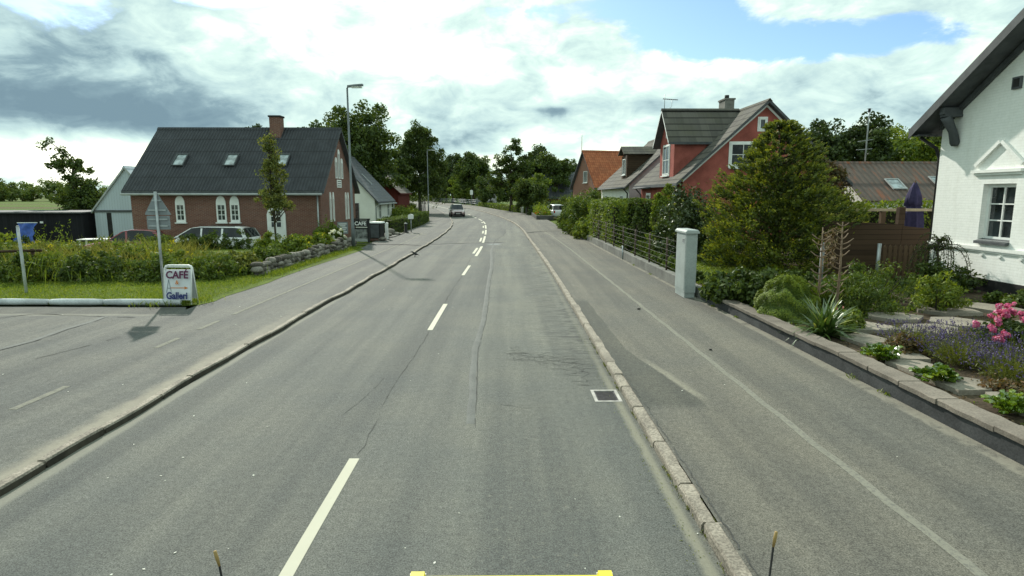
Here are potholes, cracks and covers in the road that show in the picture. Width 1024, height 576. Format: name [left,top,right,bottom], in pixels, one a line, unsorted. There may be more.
crack [345,332,429,453]
drain grate [590,390,623,402]
